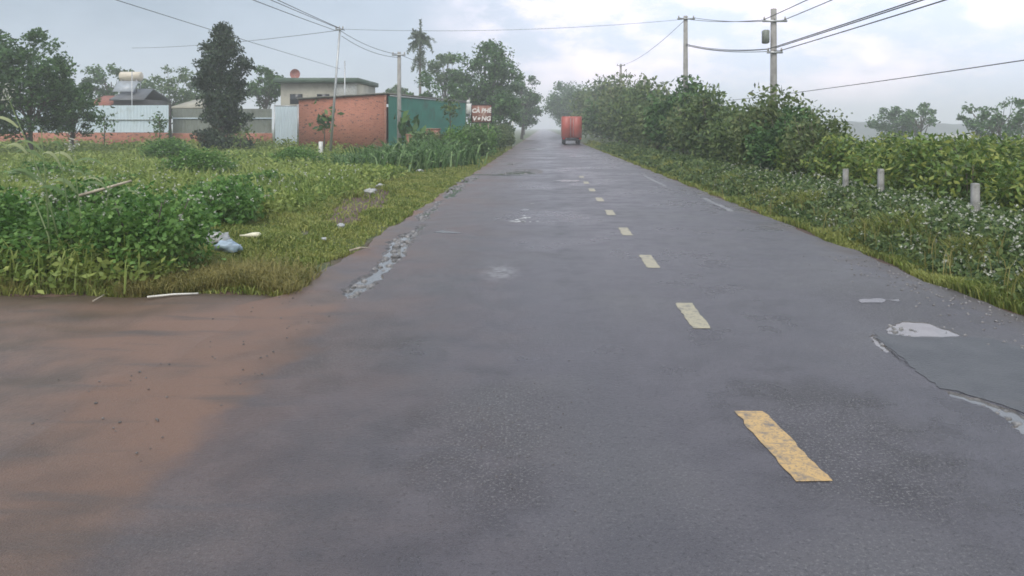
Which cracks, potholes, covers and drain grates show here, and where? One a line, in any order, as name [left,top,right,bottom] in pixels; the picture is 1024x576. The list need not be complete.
pothole [414,200,446,222]
pothole [340,223,429,299]
pothole [442,184,468,199]
pothole [886,321,960,337]
